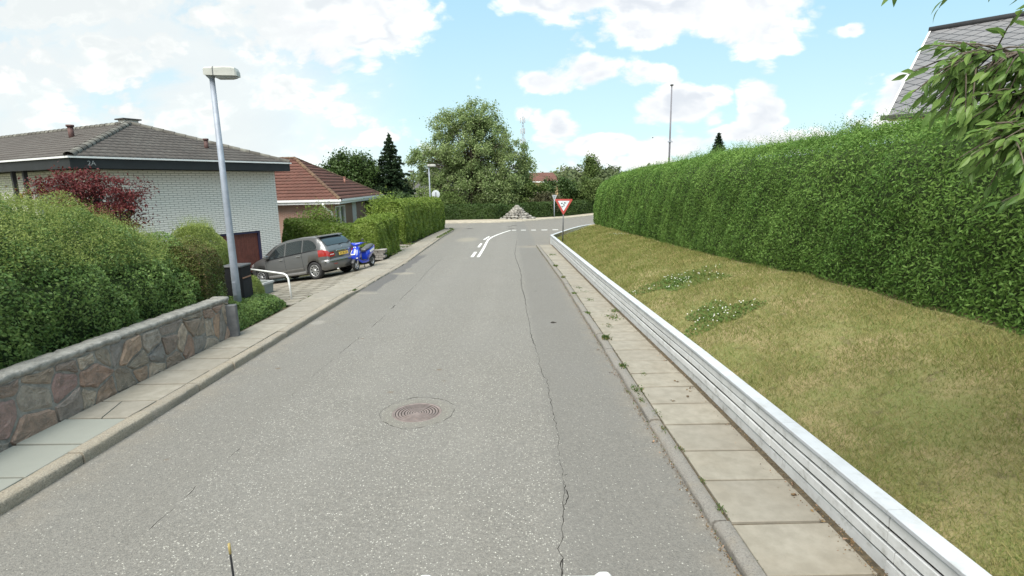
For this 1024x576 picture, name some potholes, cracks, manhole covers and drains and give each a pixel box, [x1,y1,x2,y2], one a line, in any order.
manhole cover [392,403,442,422]
crack [515,242,569,576]
